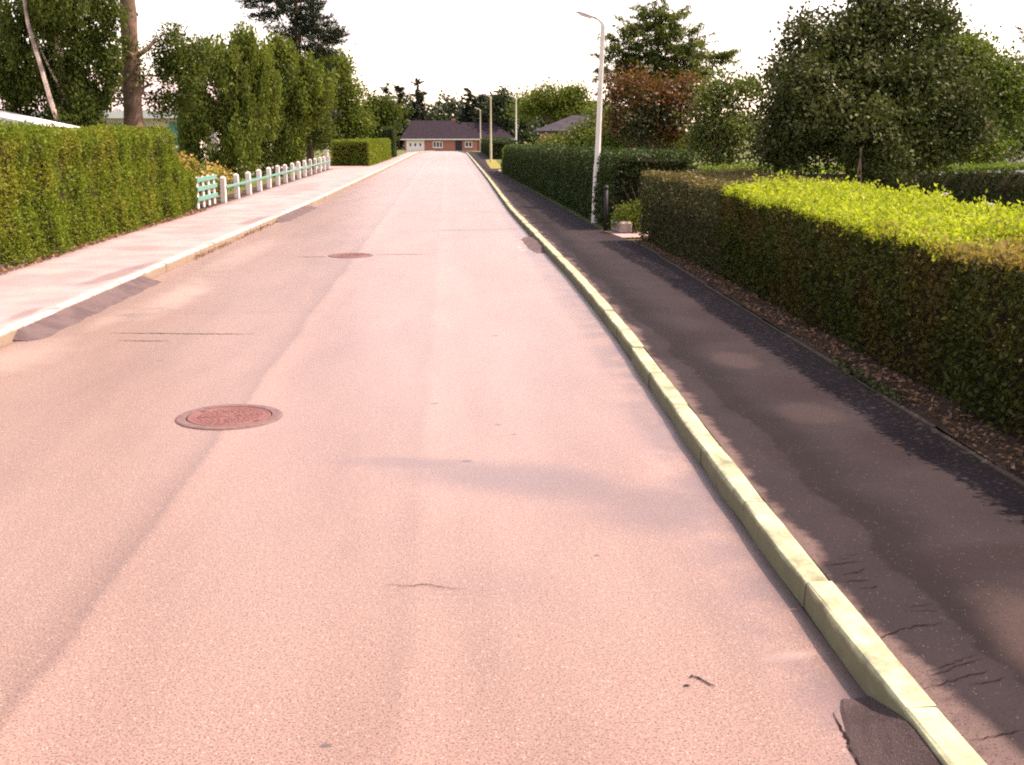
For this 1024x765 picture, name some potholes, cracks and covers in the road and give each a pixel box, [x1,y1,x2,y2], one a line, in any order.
crack [833,714,860,765]
crack [880,602,943,638]
crack [828,552,877,588]
manhole cover [175,404,283,430]
crack [926,654,1006,688]
